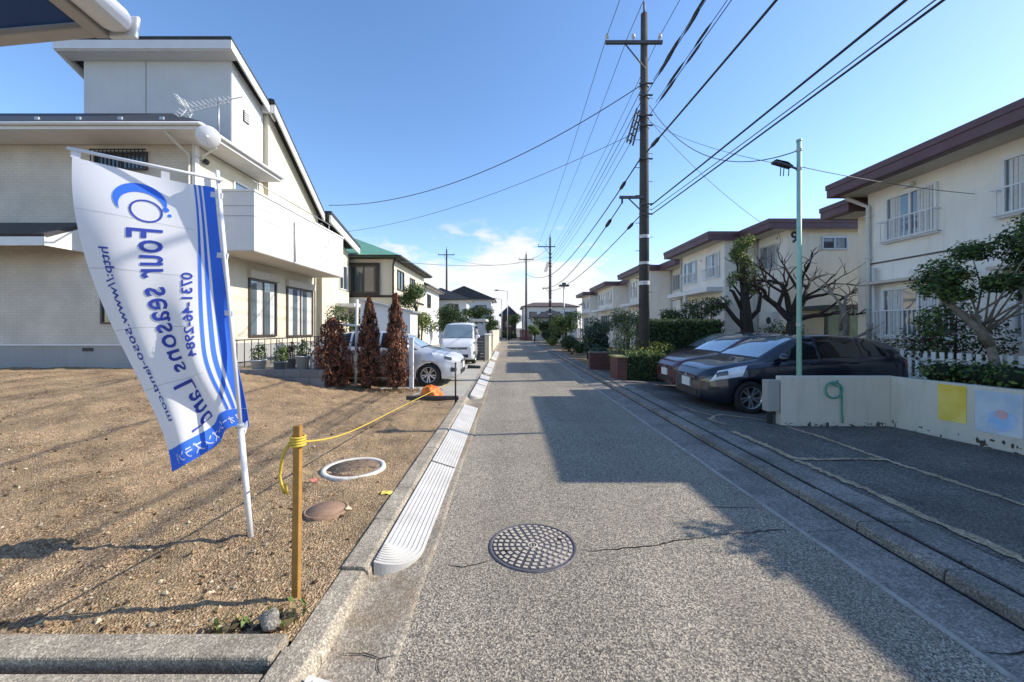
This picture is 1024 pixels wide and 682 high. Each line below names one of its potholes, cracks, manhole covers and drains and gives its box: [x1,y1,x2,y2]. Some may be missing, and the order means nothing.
crack [338,652,394,673]
crack [581,405,1024,563]
manhole cover [320,457,386,482]
manhole cover [489,524,577,573]
manhole cover [303,500,348,521]
